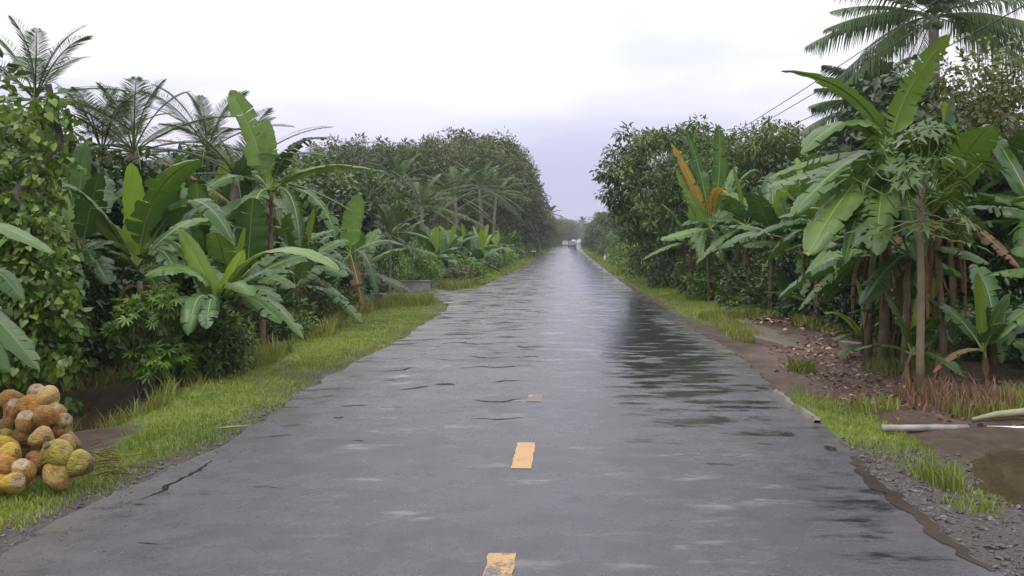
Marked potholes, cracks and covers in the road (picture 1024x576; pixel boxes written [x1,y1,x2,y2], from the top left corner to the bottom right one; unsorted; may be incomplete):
crack [443,330,540,420]
crack [139,460,212,500]
